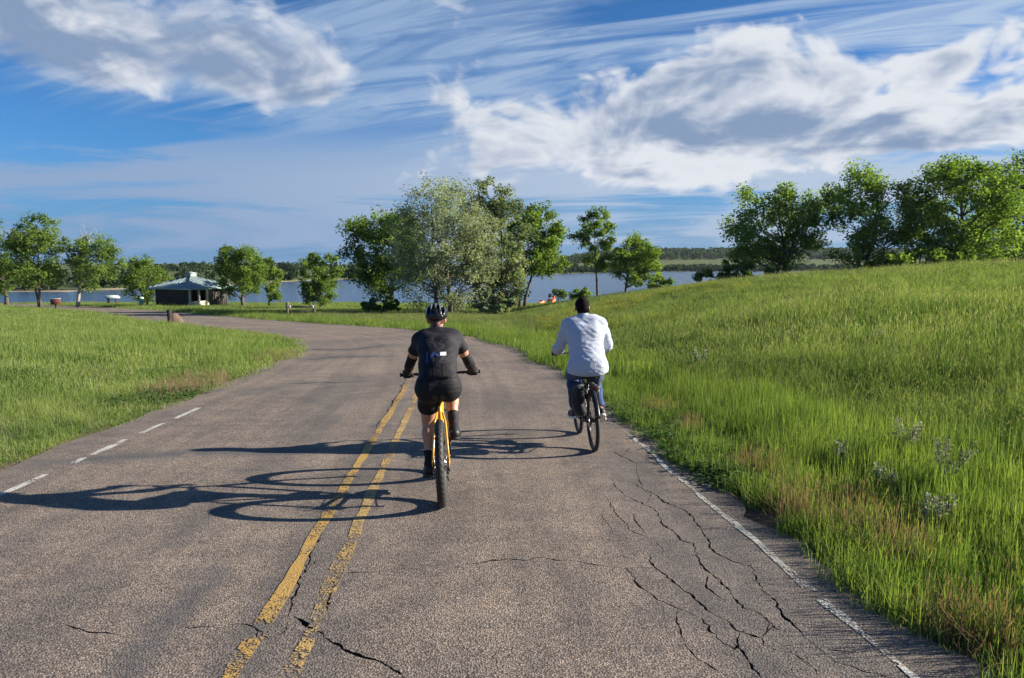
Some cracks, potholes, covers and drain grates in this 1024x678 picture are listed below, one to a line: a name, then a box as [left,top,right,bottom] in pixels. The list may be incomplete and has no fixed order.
crack [67,533,404,678]
crack [464,447,889,678]
